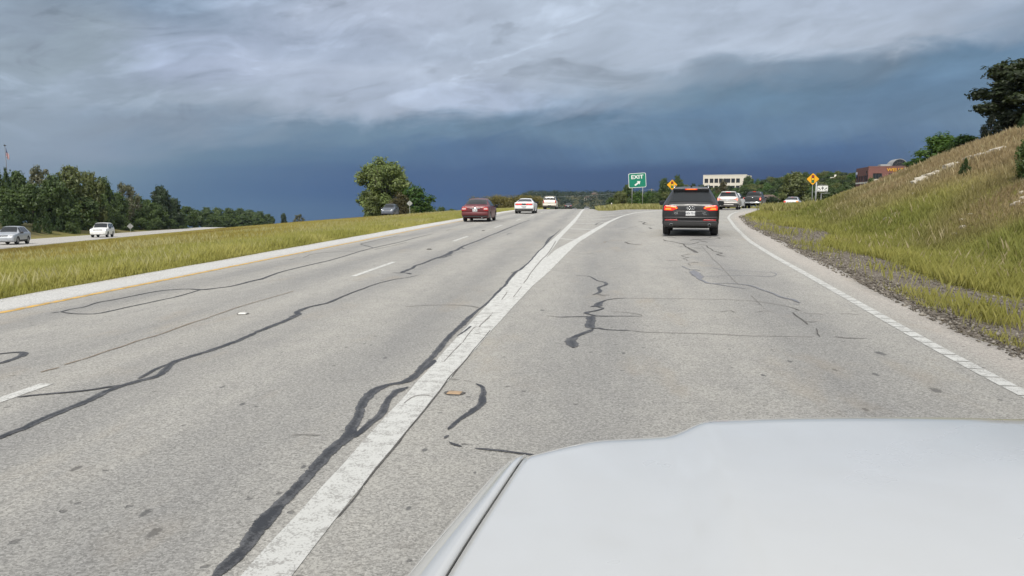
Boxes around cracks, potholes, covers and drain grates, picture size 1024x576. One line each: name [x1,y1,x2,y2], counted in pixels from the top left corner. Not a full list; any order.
crack [720,309,859,338]
